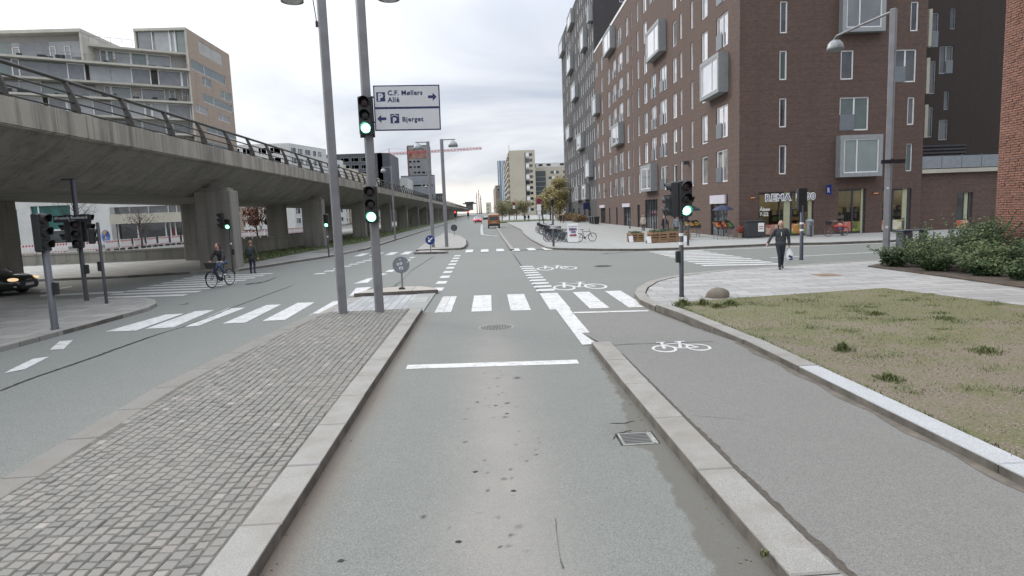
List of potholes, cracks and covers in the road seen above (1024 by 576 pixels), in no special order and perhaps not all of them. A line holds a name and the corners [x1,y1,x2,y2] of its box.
drain grate [617,431,659,446]
